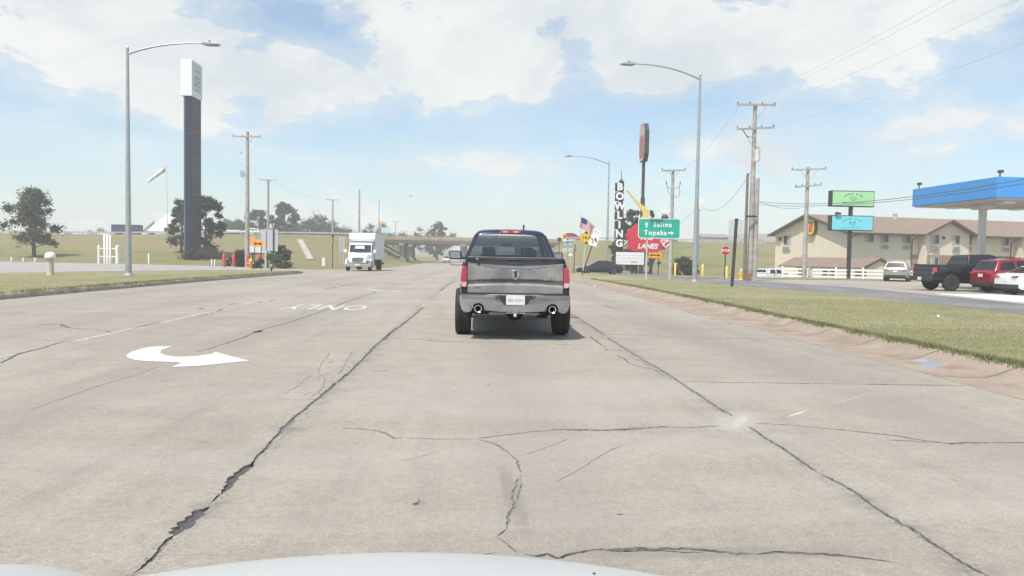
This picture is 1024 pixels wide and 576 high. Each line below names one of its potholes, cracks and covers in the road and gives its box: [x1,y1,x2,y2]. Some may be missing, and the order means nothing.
crack [0,283,375,410]
crack [133,281,1024,576]
